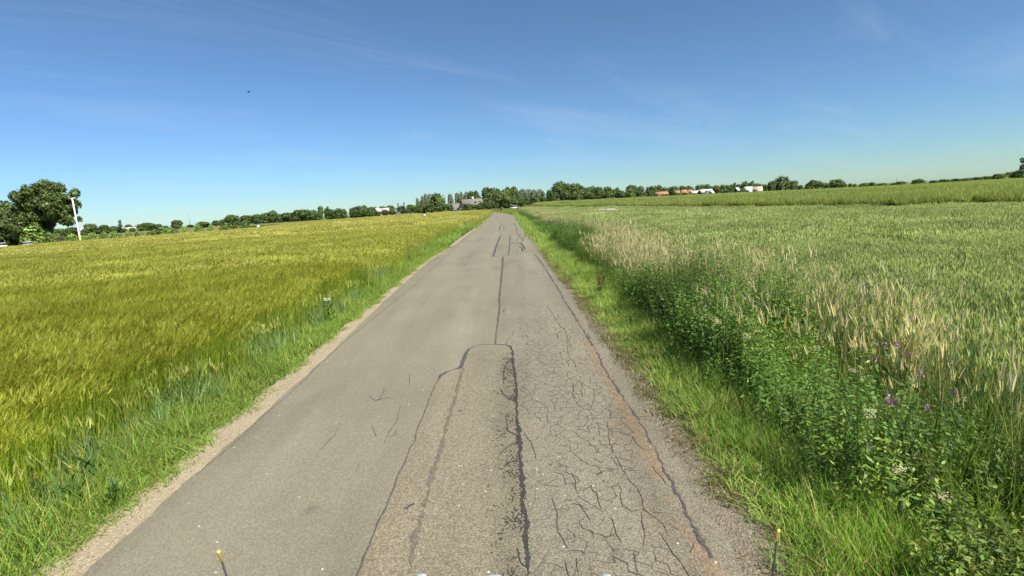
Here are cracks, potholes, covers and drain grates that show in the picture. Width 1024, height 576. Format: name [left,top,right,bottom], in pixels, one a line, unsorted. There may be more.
crack [198,248,455,473]
crack [355,223,714,576]
